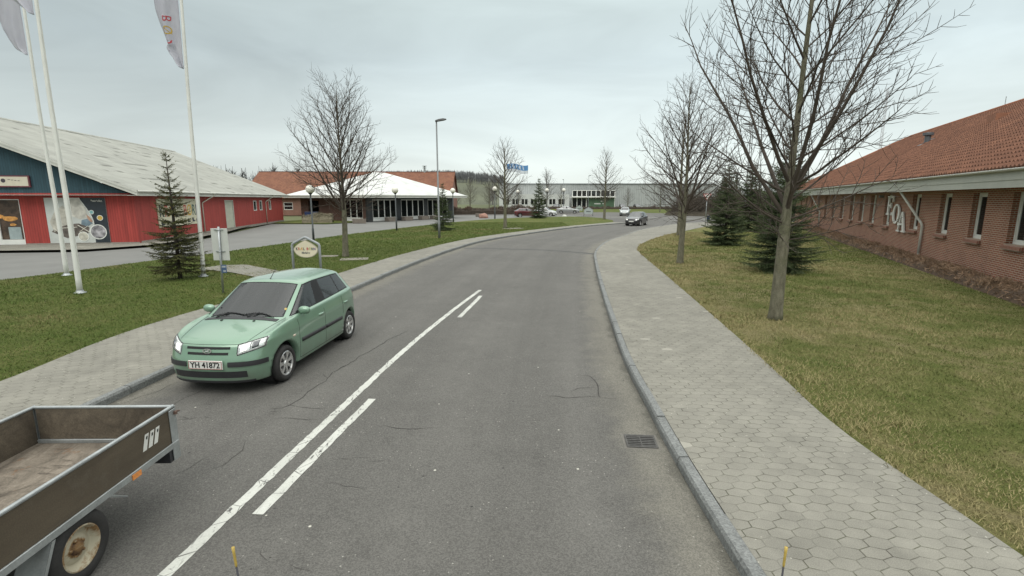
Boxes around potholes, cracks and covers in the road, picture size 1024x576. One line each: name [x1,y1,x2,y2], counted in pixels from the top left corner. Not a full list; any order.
drain grate [621,434,662,450]
crack [259,332,404,425]
